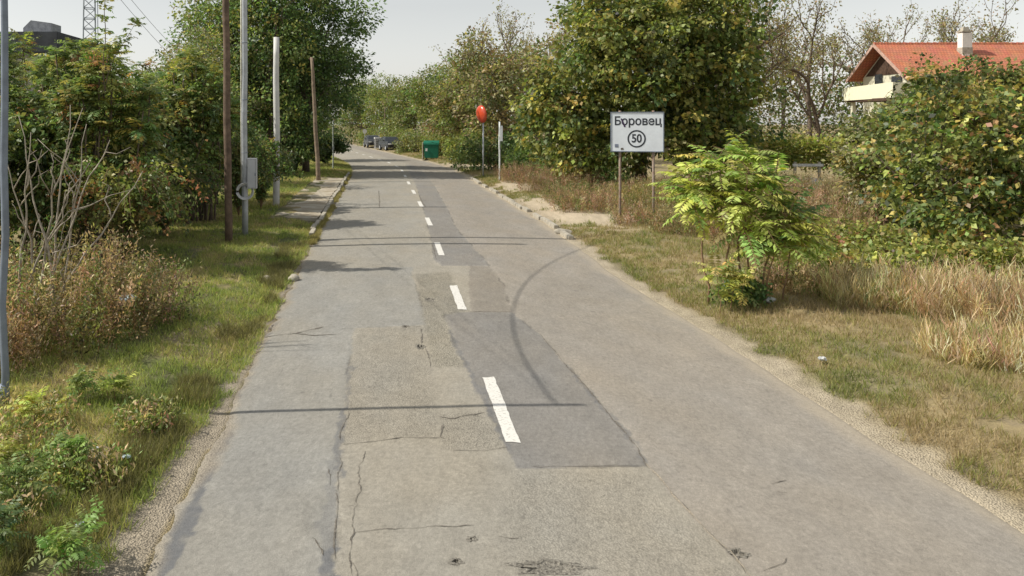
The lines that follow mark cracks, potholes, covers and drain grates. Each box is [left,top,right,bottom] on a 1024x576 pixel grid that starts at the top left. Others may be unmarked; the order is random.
pothole [727,548,752,559]
crack [348,412,482,576]
pothole [507,558,598,575]
